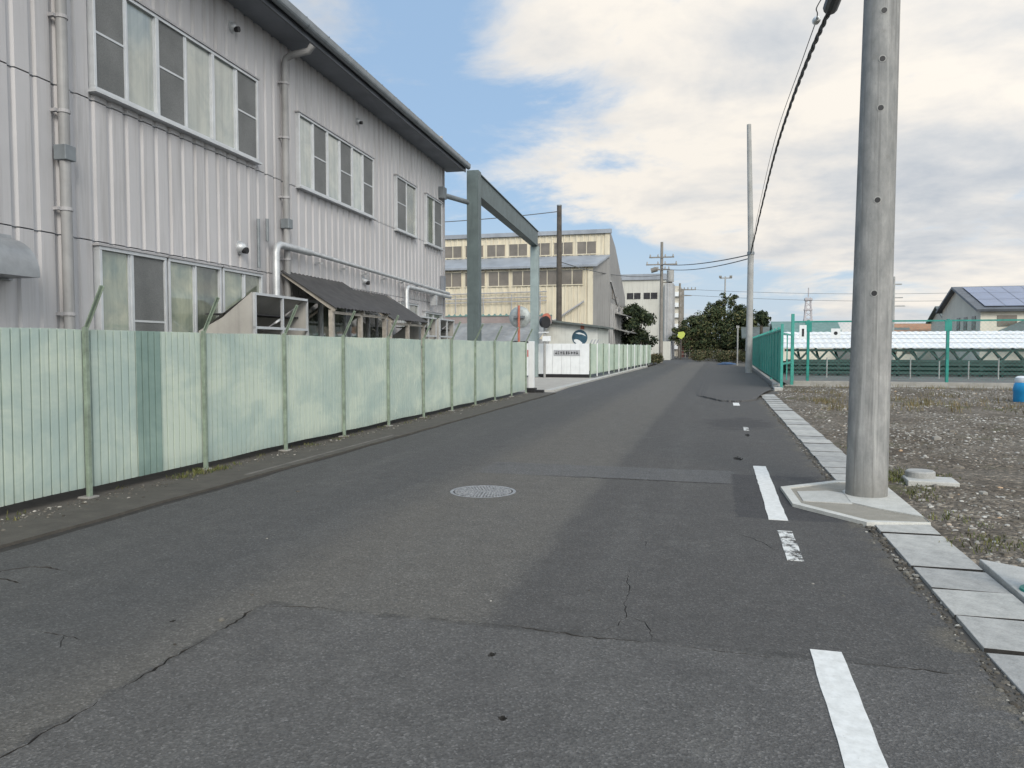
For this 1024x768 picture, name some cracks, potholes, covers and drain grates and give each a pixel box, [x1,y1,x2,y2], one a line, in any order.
manhole cover [450,485,516,498]
crack [0,567,63,584]
